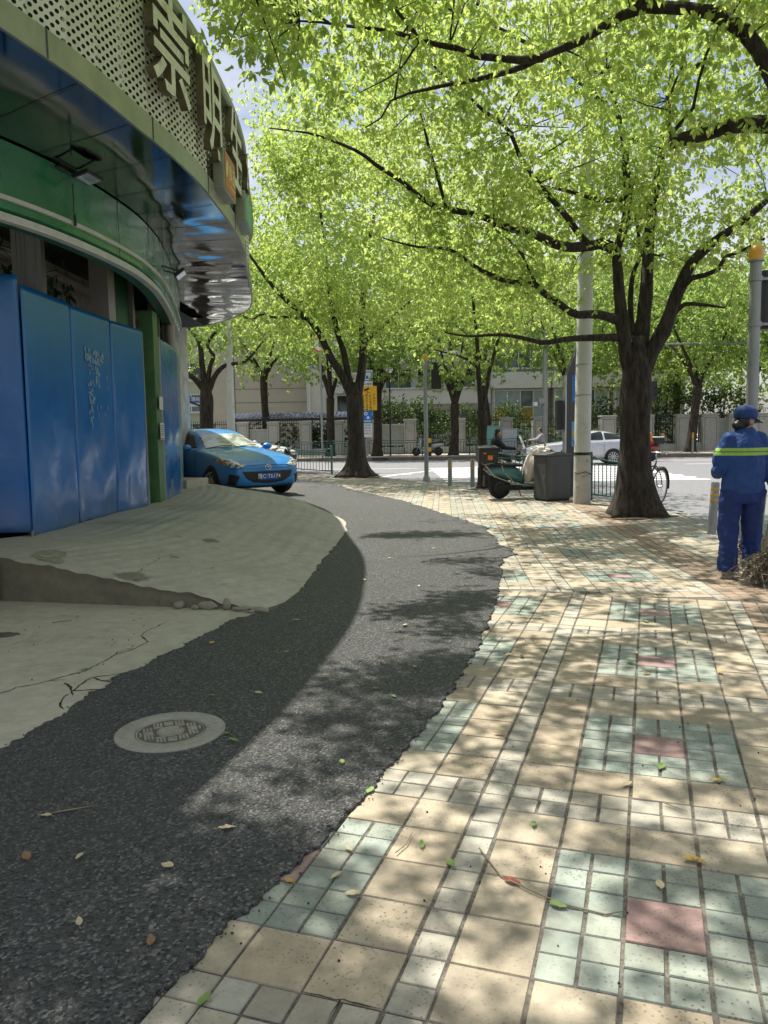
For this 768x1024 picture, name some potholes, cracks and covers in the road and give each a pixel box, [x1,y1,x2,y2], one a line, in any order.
crack [1,622,166,709]
manhole cover [114,712,225,753]
